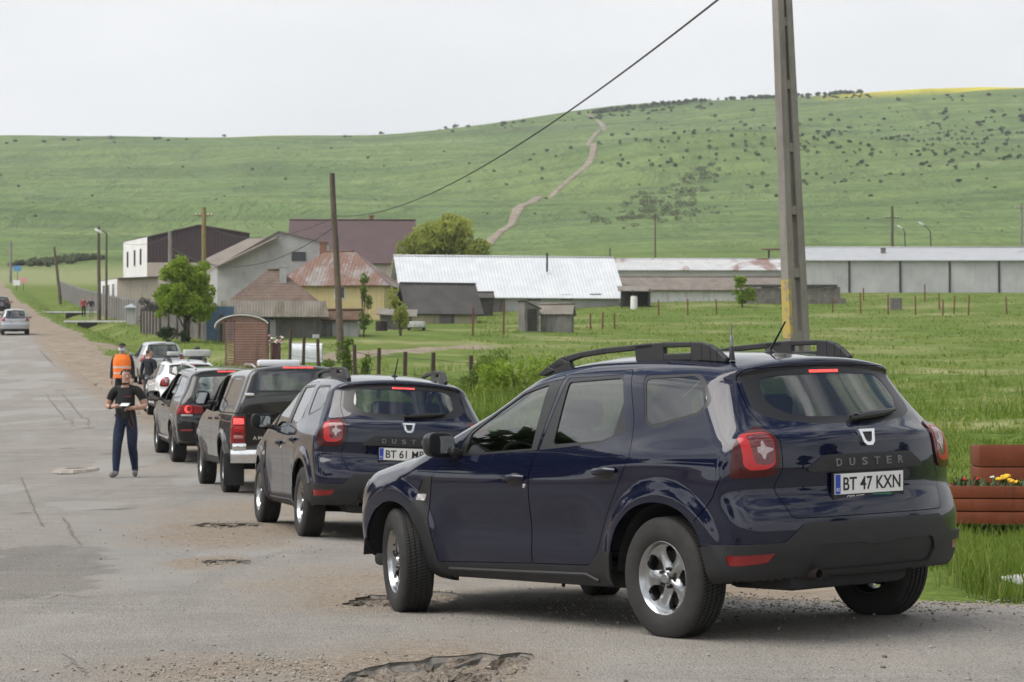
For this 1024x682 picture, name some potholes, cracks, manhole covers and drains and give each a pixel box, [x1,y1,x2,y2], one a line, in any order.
crack [47,388,93,428]
pothole [340,653,535,682]
pothole [342,592,467,607]
